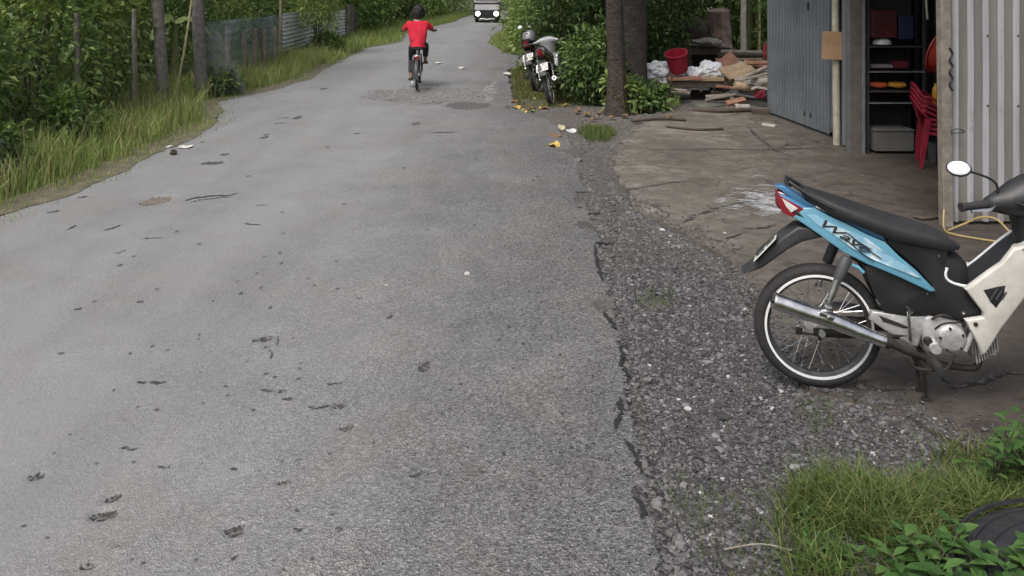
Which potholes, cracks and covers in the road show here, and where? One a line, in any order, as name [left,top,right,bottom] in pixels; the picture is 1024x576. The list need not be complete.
crack [603,311,630,380]
crack [613,397,643,473]
crack [684,196,776,249]
crack [593,241,634,282]
crack [634,497,648,517]
